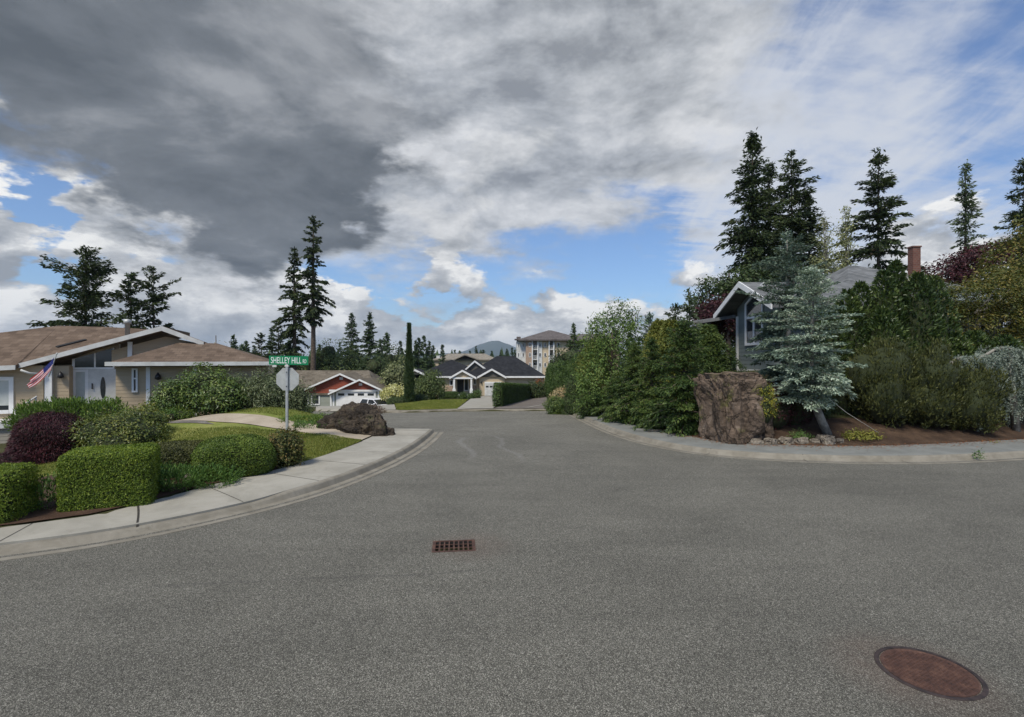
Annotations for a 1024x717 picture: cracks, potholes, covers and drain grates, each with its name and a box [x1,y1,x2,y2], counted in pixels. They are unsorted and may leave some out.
manhole cover [874,646,989,701]
drain grate [432,539,476,553]
